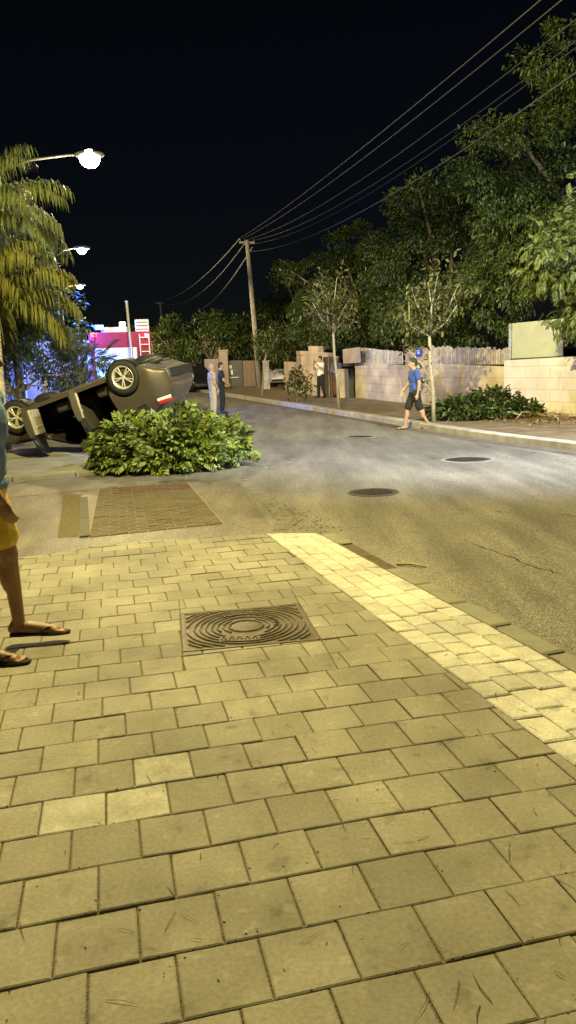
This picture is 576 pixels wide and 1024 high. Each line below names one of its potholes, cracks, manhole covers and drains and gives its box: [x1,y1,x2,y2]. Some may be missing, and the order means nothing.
manhole cover [347,488,399,497]
manhole cover [181,604,320,653]
